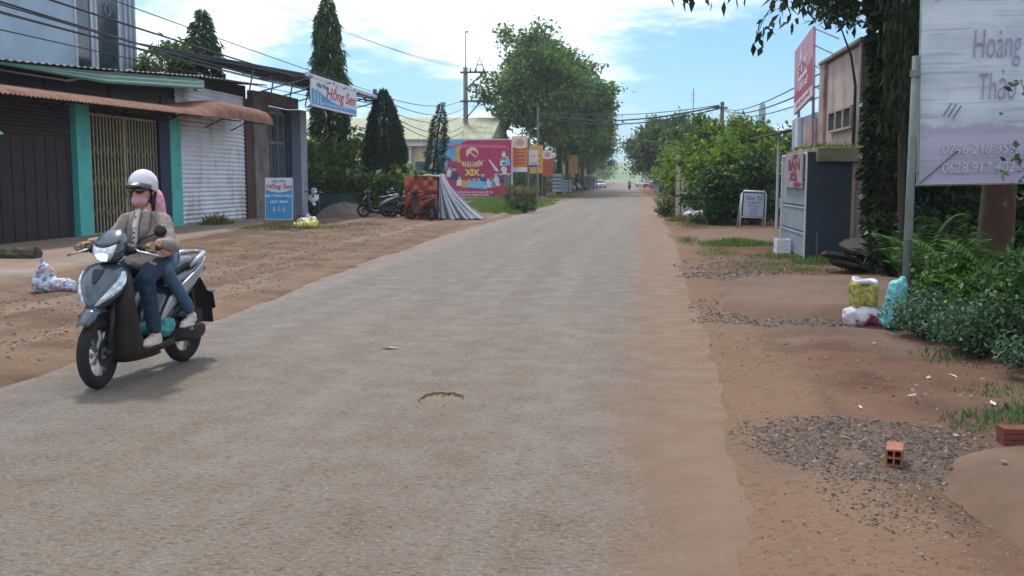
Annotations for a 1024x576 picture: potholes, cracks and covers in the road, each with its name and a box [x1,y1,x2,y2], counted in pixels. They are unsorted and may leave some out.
pothole [418,392,464,406]
